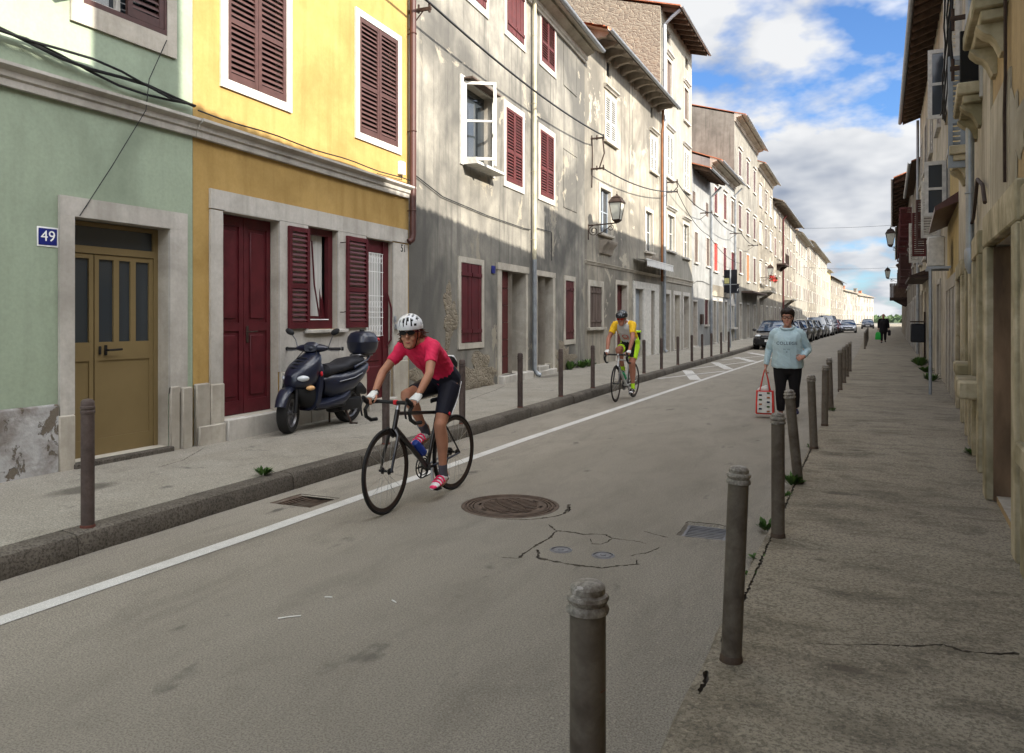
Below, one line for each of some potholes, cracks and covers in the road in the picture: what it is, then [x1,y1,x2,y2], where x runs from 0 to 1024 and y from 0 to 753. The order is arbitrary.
crack [816,643,1019,655]
manhole cover [461,494,559,518]
drain grate [677,521,726,541]
crack [502,504,665,568]
crack [698,449,812,694]
drain grate [271,494,339,508]
